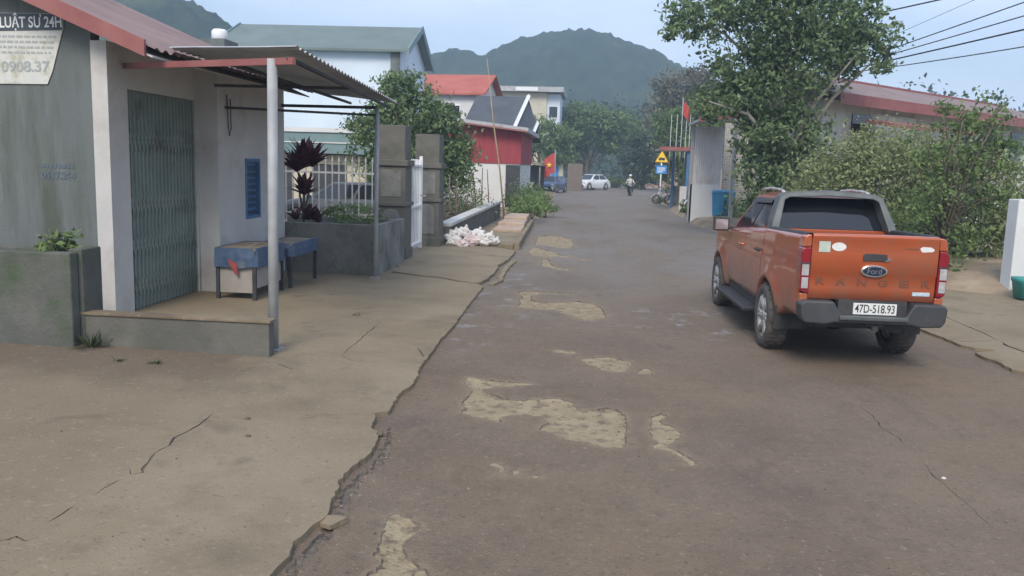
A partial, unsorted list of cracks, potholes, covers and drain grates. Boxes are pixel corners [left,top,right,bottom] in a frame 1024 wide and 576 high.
pothole [528,247,570,258]
pothole [366,513,437,576]
crack [342,324,424,363]
pothole [515,291,606,321]
pothole [581,356,632,372]
pothole [541,259,569,271]
crack [0,414,212,541]
pothole [534,235,574,249]
pothole [461,377,628,448]
pothole [648,413,696,466]
crack [851,404,998,531]
